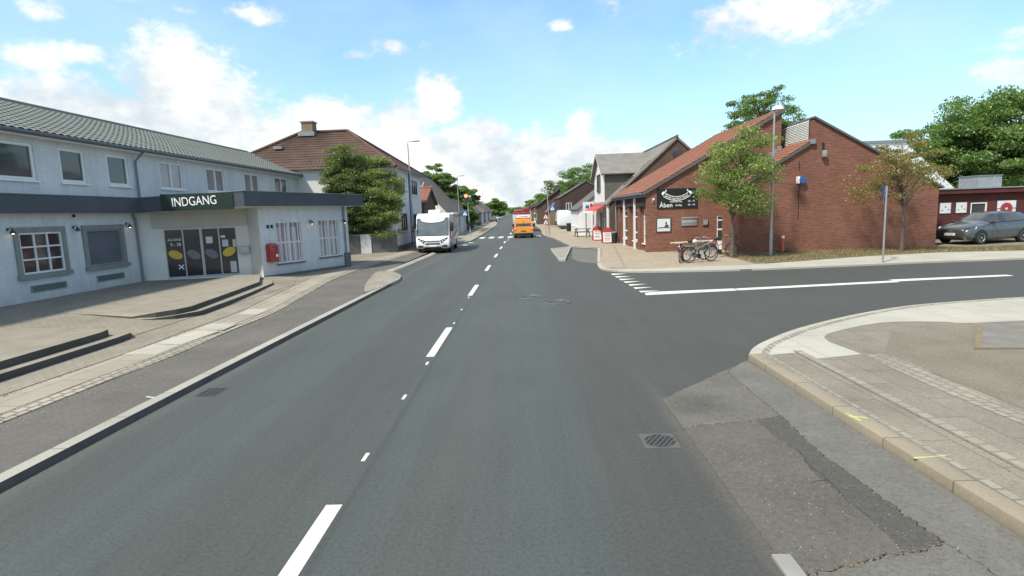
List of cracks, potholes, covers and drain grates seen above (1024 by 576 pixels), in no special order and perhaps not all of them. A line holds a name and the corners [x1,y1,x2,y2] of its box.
drain grate [638,433,682,449]
drain grate [193,387,229,397]
